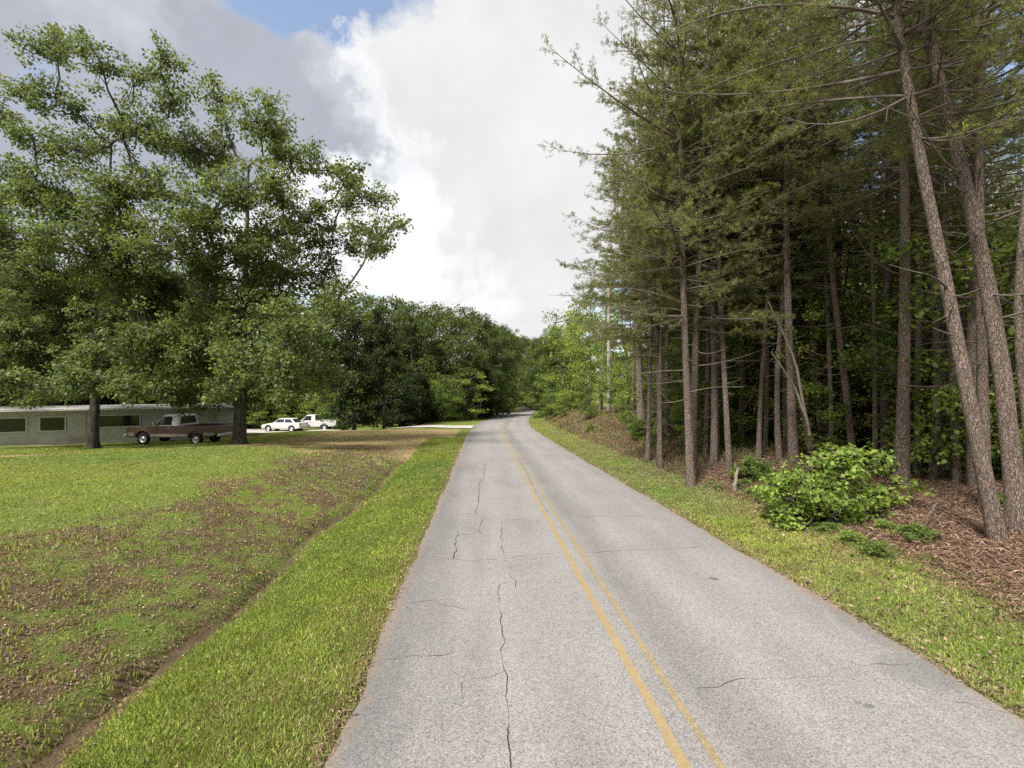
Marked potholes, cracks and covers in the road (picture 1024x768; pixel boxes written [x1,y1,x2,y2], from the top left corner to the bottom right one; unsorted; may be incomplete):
crack [698,663,912,688]
crack [411,464,695,768]
